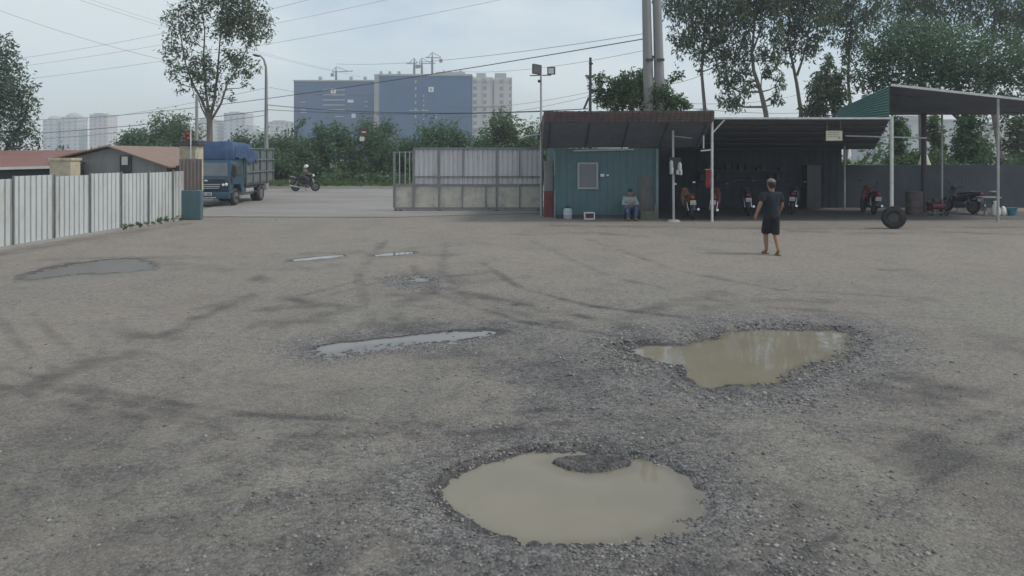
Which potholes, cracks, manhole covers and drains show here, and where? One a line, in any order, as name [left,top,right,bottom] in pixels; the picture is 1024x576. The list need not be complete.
pothole [276,254,352,265]
pothole [361,251,422,260]
pothole [374,428,796,576]
pothole [285,321,548,370]
pothole [8,257,169,286]
pothole [551,314,1006,422]
